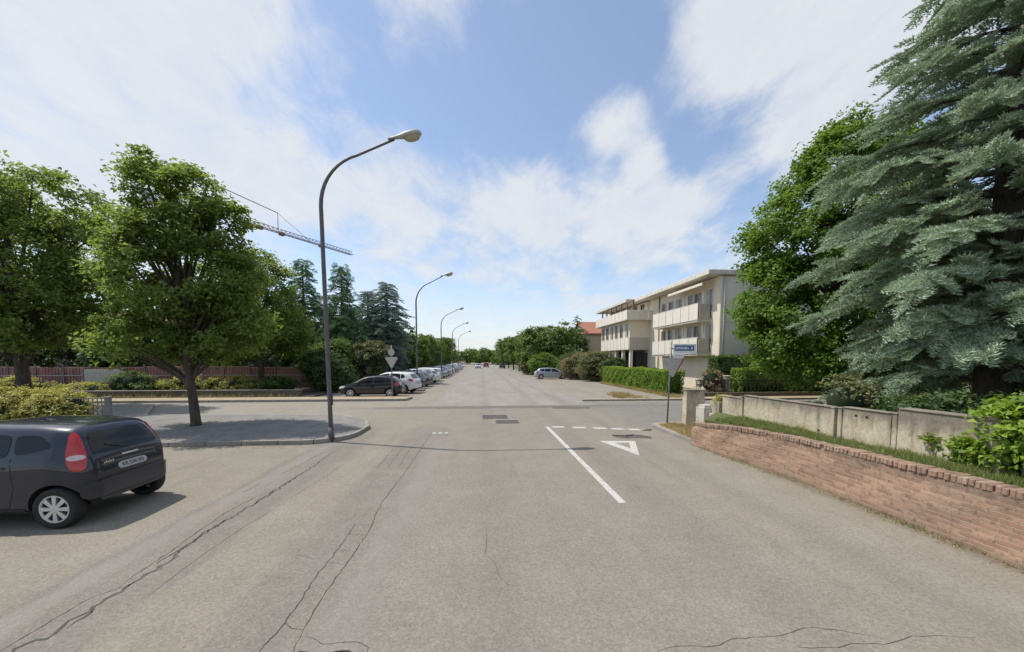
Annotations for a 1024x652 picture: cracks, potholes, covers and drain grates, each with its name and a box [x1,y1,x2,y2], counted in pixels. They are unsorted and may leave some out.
crack [662,627,975,650]
crack [259,433,431,652]
crack [1,451,335,652]
